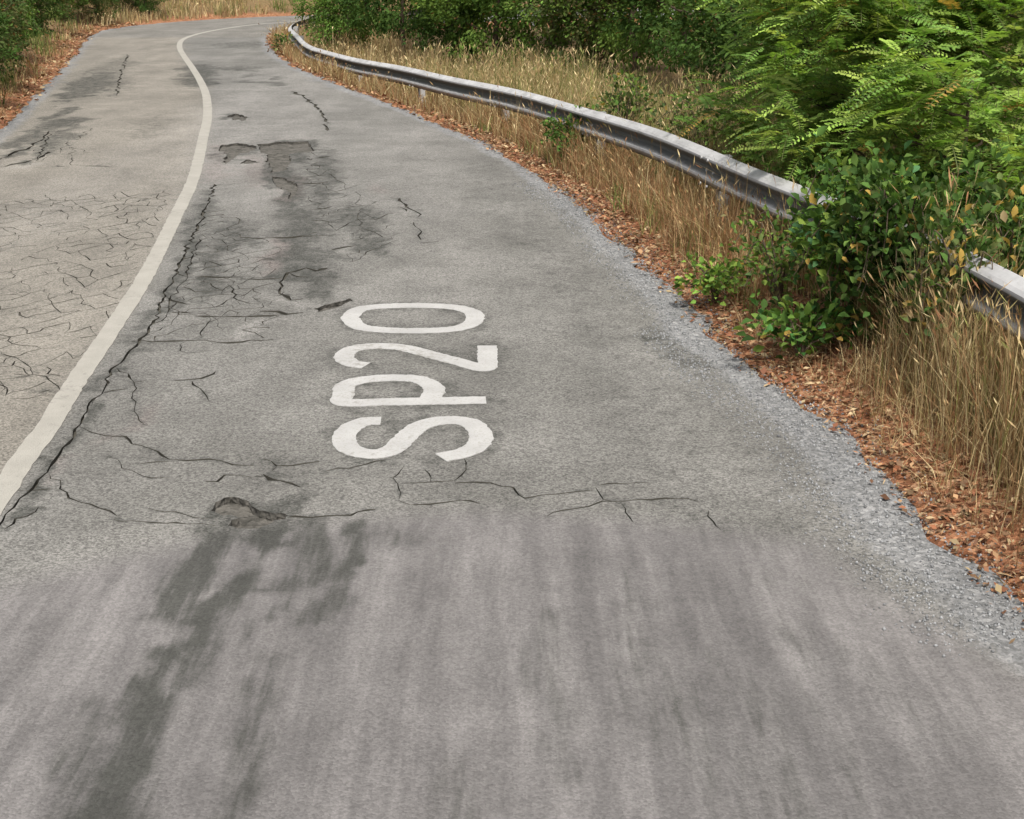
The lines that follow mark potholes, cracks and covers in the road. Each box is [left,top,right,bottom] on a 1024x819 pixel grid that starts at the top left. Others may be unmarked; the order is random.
pothole [257,141,315,173]
crack [301,152,396,262]
crack [1,128,109,167]
crack [290,91,329,131]
crack [115,55,129,95]
crack [0,184,721,530]
pothole [219,143,257,164]
pothole [211,497,287,529]
